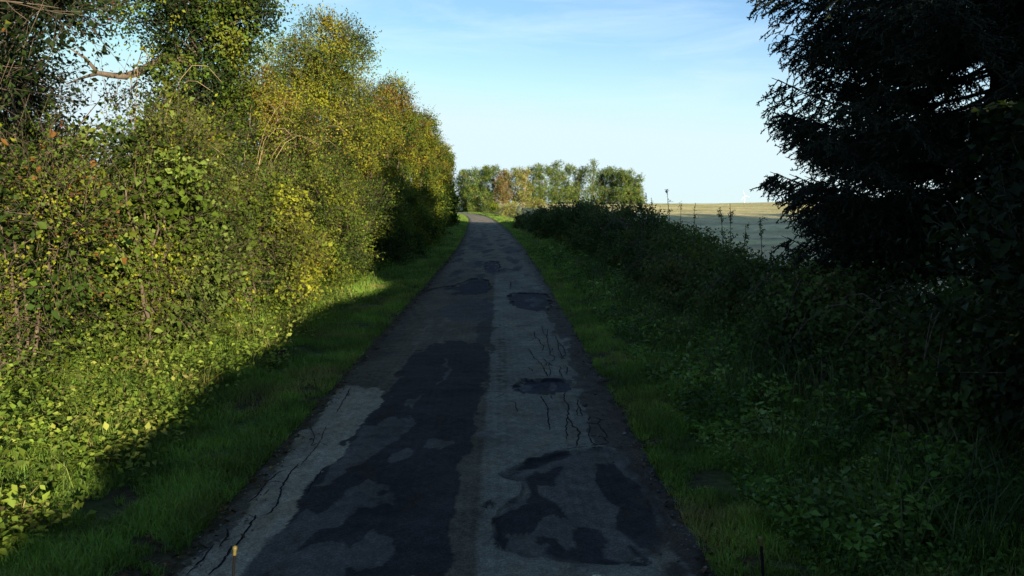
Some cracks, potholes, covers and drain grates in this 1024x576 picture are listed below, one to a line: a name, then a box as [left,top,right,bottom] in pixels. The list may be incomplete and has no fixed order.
pothole [506,292,557,311]
pothole [510,377,577,395]
pothole [420,278,494,296]
crack [186,388,351,575]
pothole [484,261,501,273]
crack [526,326,609,450]
